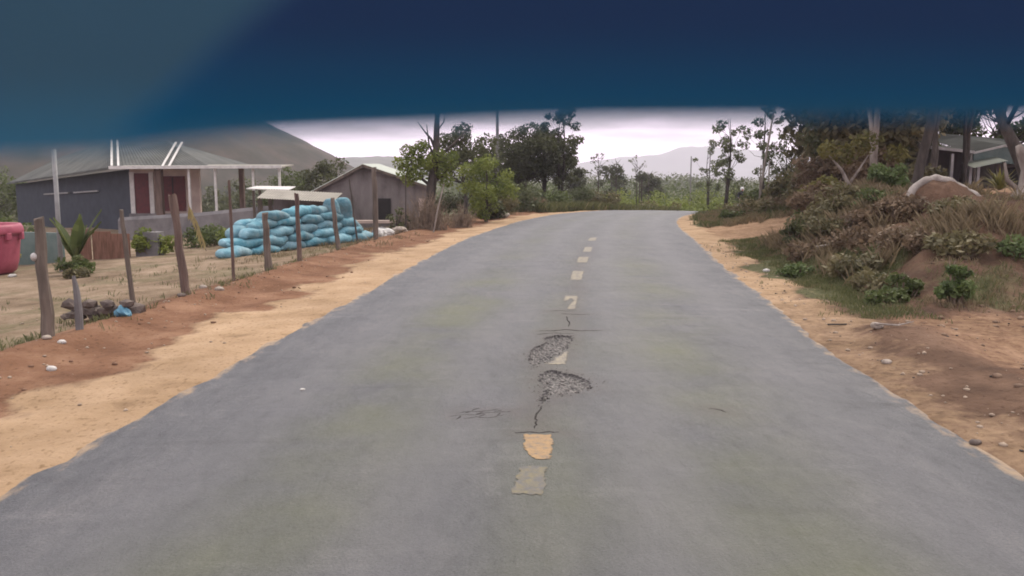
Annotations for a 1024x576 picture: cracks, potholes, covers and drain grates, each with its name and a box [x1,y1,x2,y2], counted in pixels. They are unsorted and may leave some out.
pothole [525,368,605,407]
pothole [523,332,578,369]
crack [544,310,600,334]
crack [450,406,554,433]
